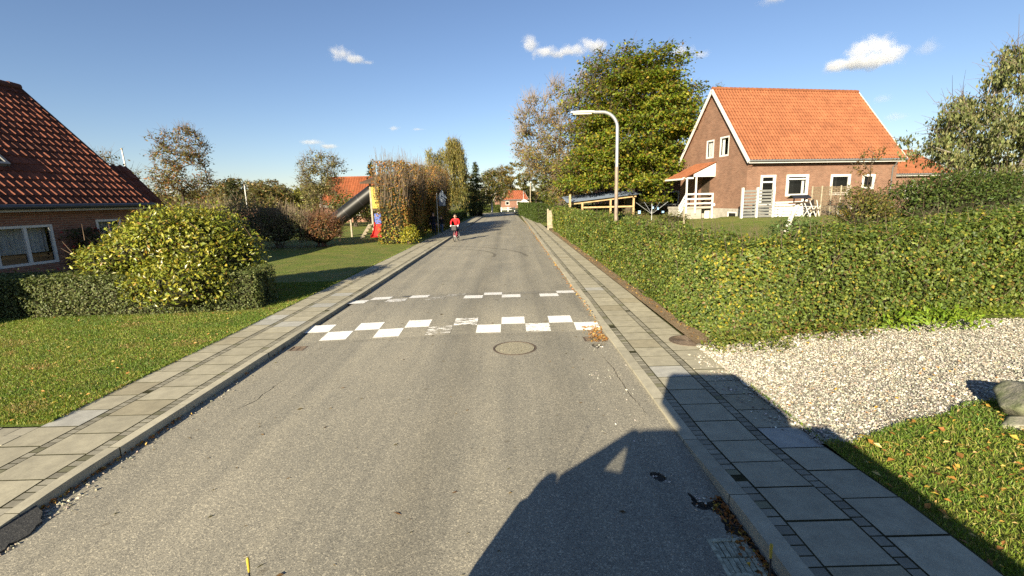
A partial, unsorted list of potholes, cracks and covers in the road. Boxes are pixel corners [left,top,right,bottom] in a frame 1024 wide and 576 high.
manhole cover [669,335,698,346]
manhole cover [493,341,537,355]
